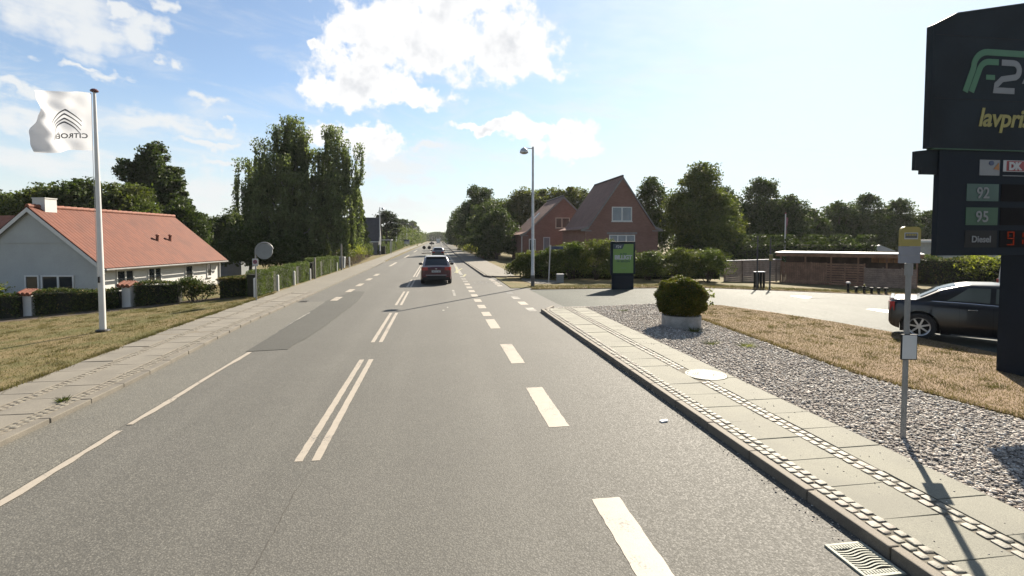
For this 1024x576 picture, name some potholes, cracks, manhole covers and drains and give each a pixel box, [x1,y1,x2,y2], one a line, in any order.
manhole cover [684,369,728,381]
drain grate [824,541,906,576]
